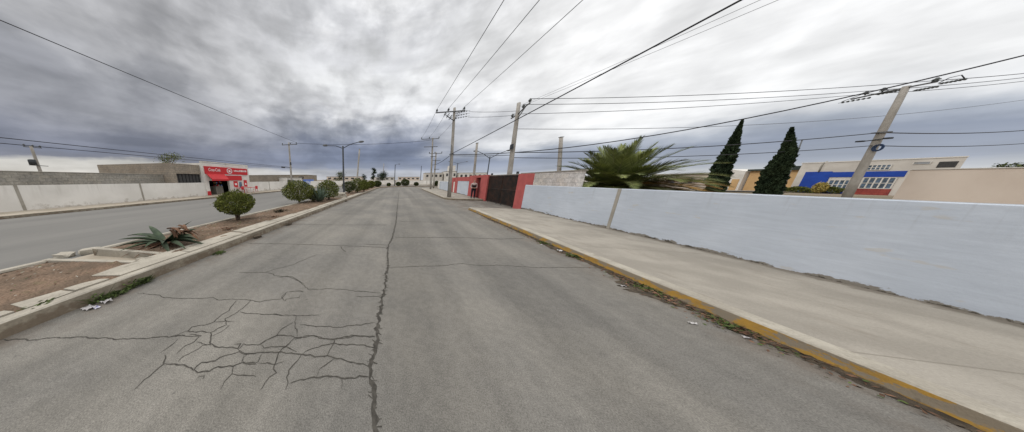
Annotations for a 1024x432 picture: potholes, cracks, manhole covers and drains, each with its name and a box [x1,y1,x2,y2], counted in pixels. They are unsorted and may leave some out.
crack [4,195,594,432]
